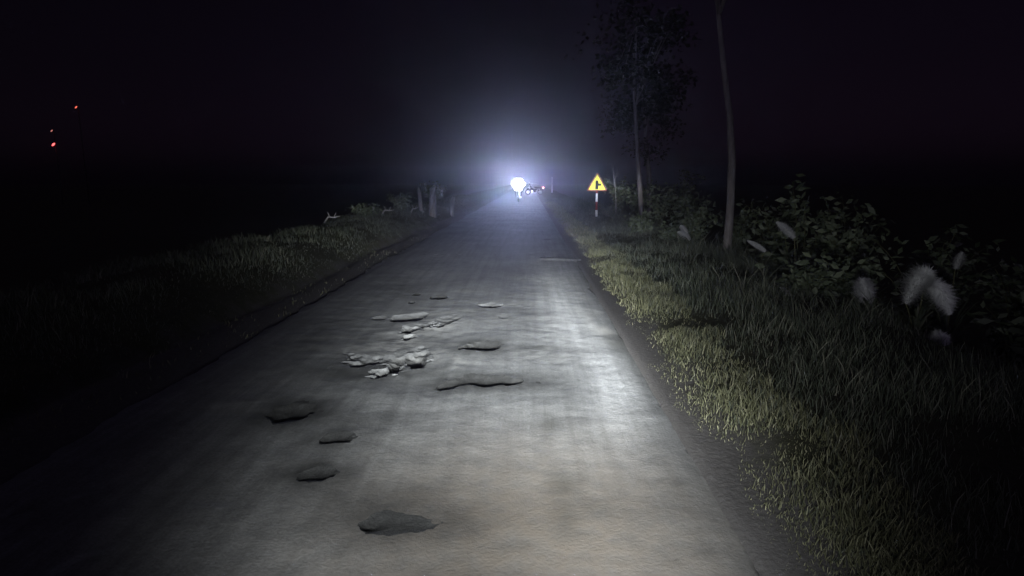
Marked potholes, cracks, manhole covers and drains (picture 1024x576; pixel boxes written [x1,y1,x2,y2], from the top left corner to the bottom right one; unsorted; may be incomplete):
pothole [327,345,434,380]
pothole [319,430,358,445]
pothole [457,340,504,351]
pothole [389,312,429,322]
pothole [394,320,438,341]
pothole [357,510,443,536]
pothole [429,313,465,328]
pothole [265,400,324,425]
pothole [435,373,543,392]
pothole [296,464,340,483]
